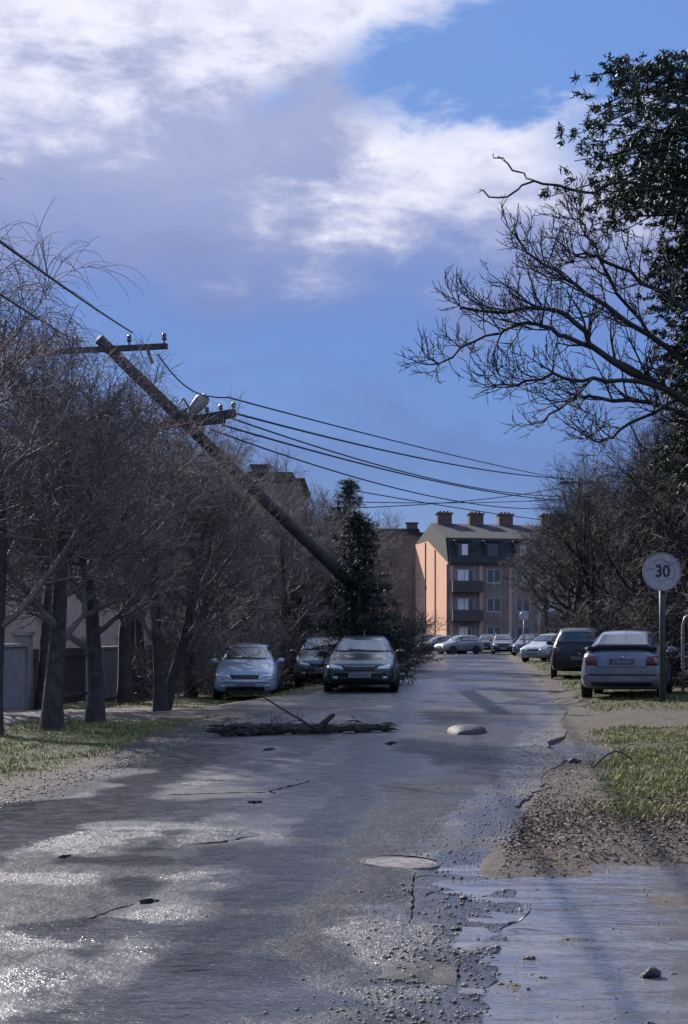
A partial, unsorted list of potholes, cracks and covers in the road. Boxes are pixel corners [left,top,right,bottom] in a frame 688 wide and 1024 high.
crack [135,780,311,797]
crack [171,835,259,846]
manhole cover [360,856,440,869]
crack [83,903,135,922]
crack [395,874,444,928]
